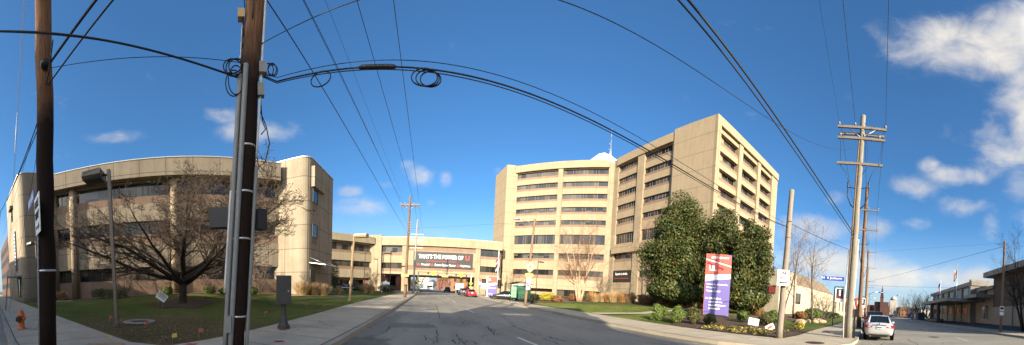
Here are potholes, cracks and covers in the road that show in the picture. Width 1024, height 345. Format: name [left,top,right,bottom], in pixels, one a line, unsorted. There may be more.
crack [425,307,506,344]
